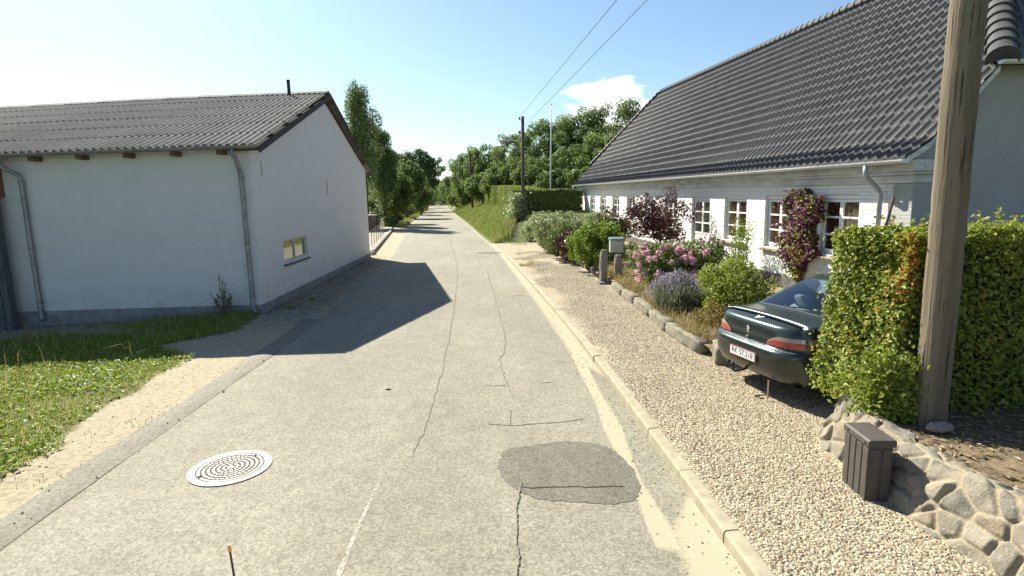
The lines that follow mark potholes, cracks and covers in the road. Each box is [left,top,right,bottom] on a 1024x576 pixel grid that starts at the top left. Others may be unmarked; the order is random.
manhole cover [186,450,272,487]
crack [516,478,624,576]
crack [413,235,582,453]
